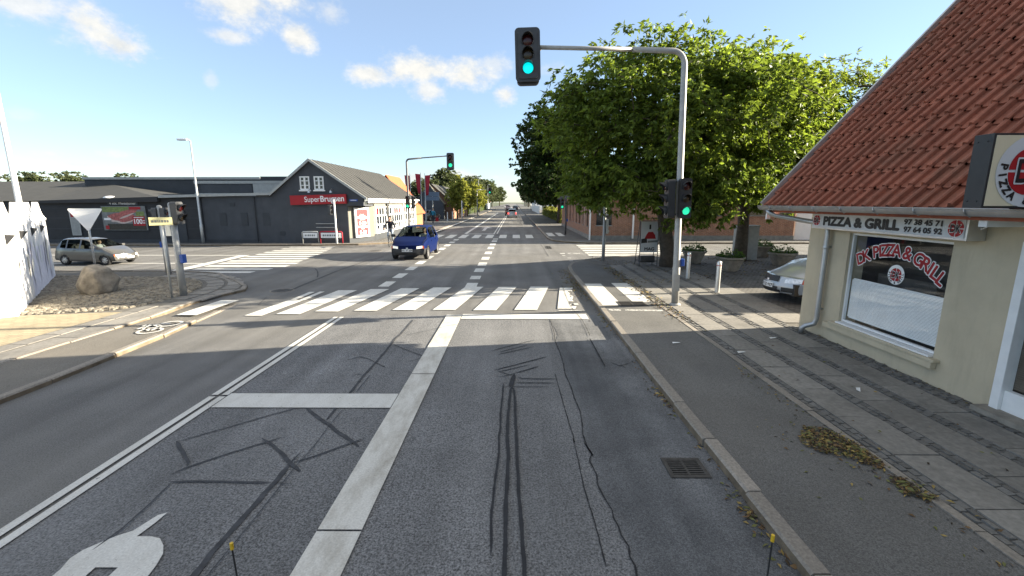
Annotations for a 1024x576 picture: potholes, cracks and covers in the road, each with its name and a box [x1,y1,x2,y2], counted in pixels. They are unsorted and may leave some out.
drain grate [660,458,712,479]
crack [562,286,631,367]
crack [555,374,606,566]
